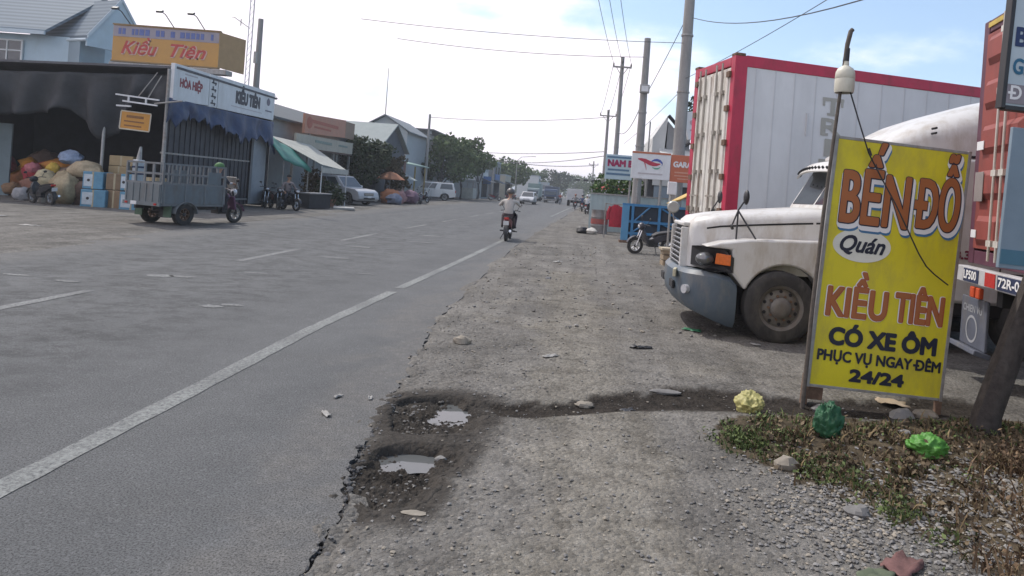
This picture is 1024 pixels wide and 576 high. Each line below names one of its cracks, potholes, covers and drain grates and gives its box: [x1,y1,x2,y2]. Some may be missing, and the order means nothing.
crack [304,492,368,576]
pothole [385,393,498,437]
pothole [340,441,473,518]
